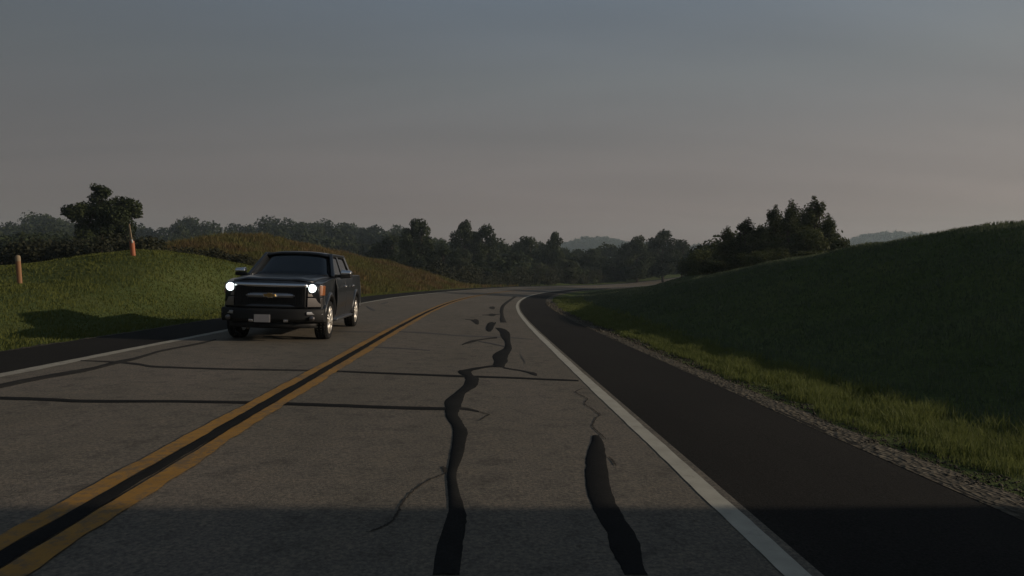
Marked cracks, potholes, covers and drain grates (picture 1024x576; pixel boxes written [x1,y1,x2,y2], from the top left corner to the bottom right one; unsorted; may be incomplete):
crack [81,330,606,439]
crack [366,466,447,532]
